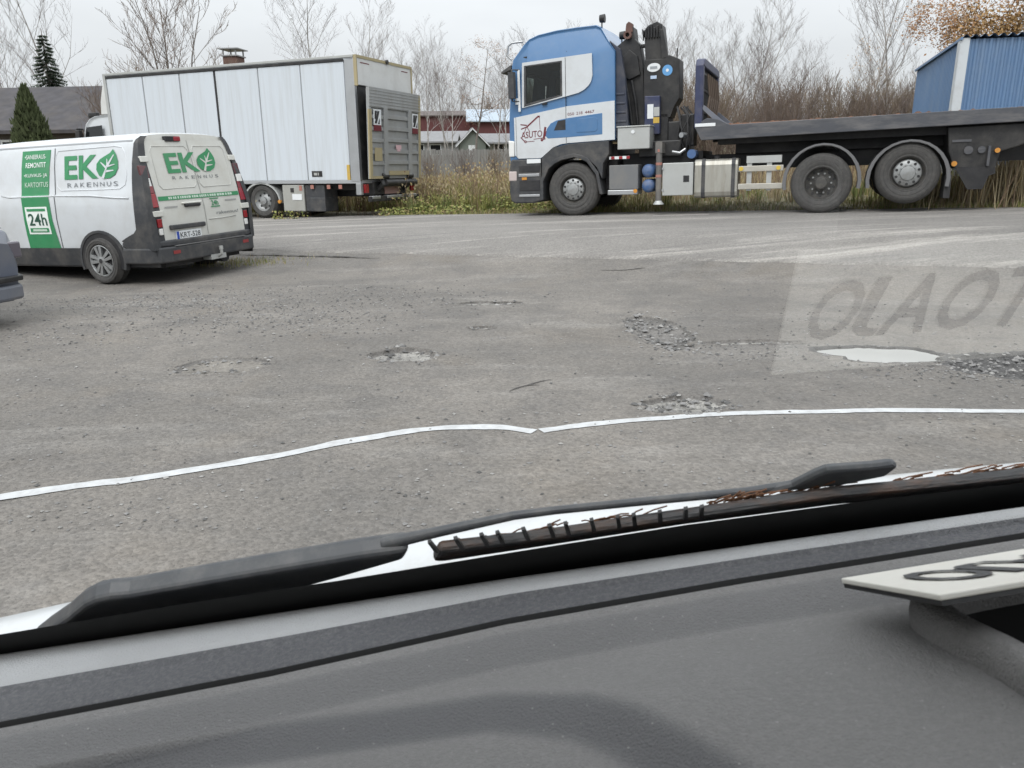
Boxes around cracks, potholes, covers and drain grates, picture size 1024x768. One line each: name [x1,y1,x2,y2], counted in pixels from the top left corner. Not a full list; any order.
pothole [631,392,743,417]
pothole [362,344,445,364]
pothole [804,344,962,365]
pothole [166,356,277,377]
pothole [614,311,712,355]
pothole [933,350,1024,382]
